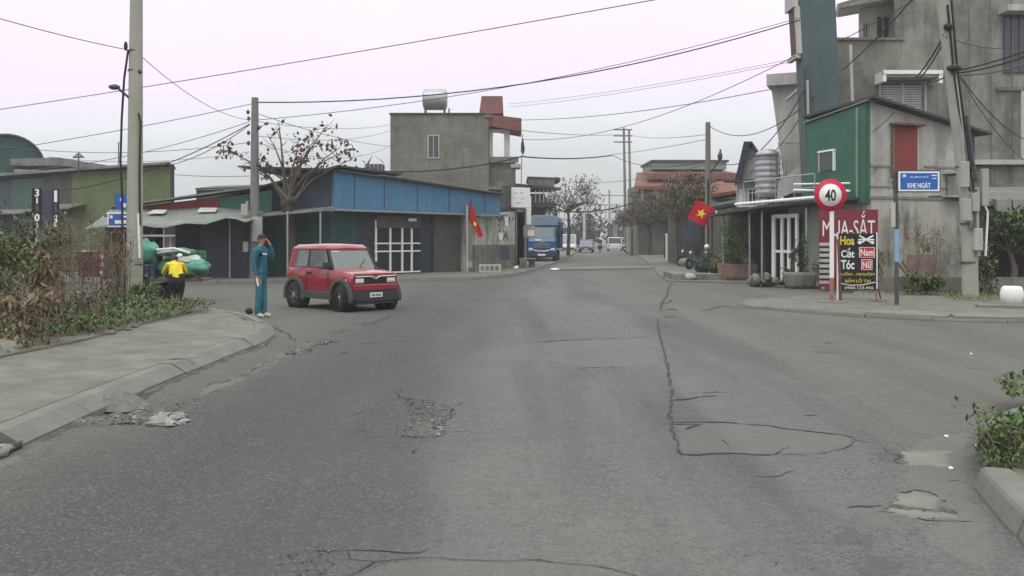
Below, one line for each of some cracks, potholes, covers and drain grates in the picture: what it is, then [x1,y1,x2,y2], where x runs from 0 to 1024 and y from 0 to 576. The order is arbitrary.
pothole [398,397,456,438]
pothole [883,498,958,519]
crack [676,415,865,477]
crack [273,315,424,354]
pothole [71,396,205,427]
crack [321,549,636,576]
